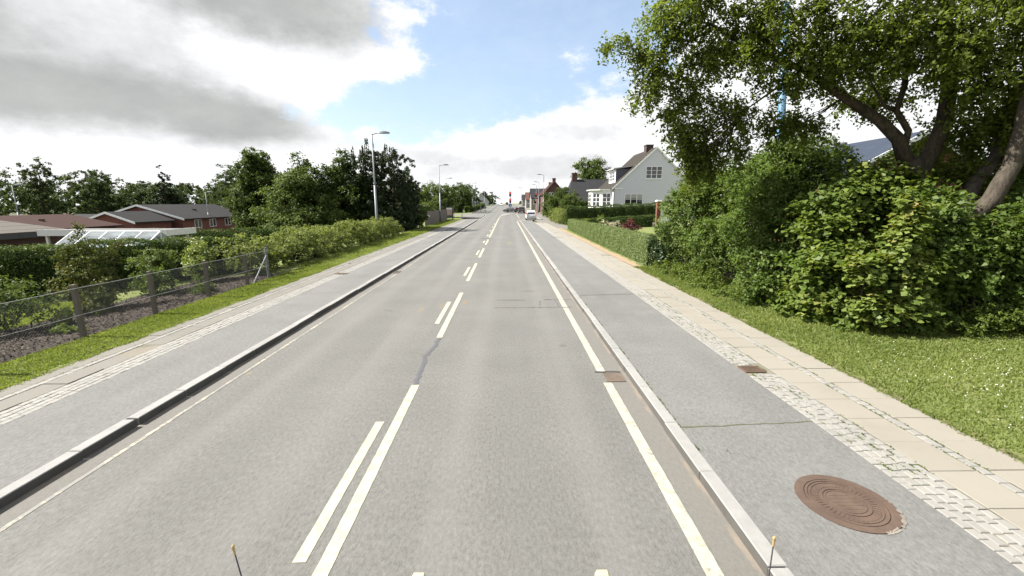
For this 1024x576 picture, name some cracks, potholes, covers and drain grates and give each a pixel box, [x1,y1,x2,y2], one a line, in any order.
manhole cover [794,475,907,535]
drain grate [602,373,626,382]
